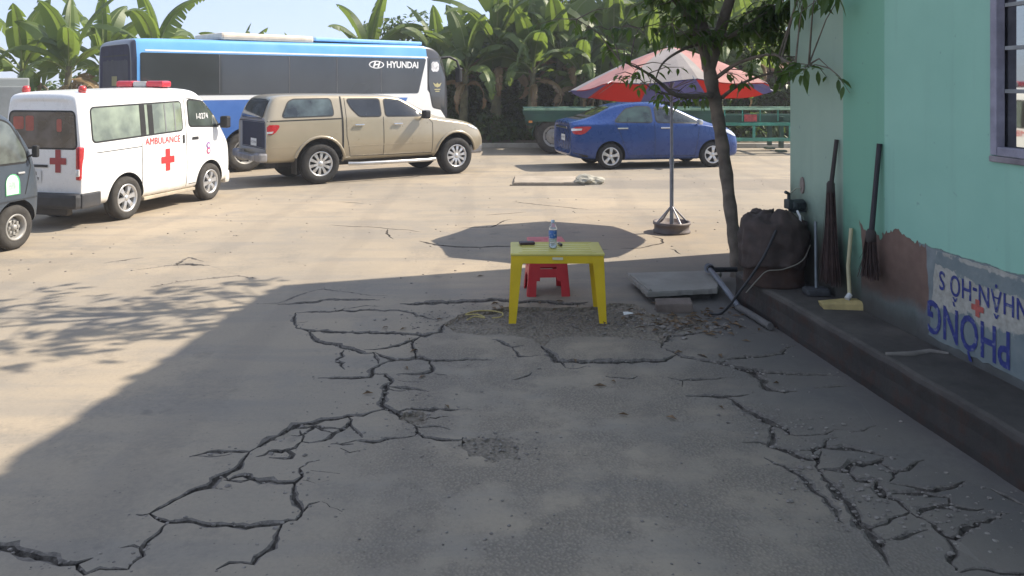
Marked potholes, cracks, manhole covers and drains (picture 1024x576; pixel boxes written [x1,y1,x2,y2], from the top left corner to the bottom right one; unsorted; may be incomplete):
pothole [444,303,704,346]
crack [631,236,680,254]
pothole [459,437,521,463]
crack [0,289,1024,576]
crack [336,225,607,250]
